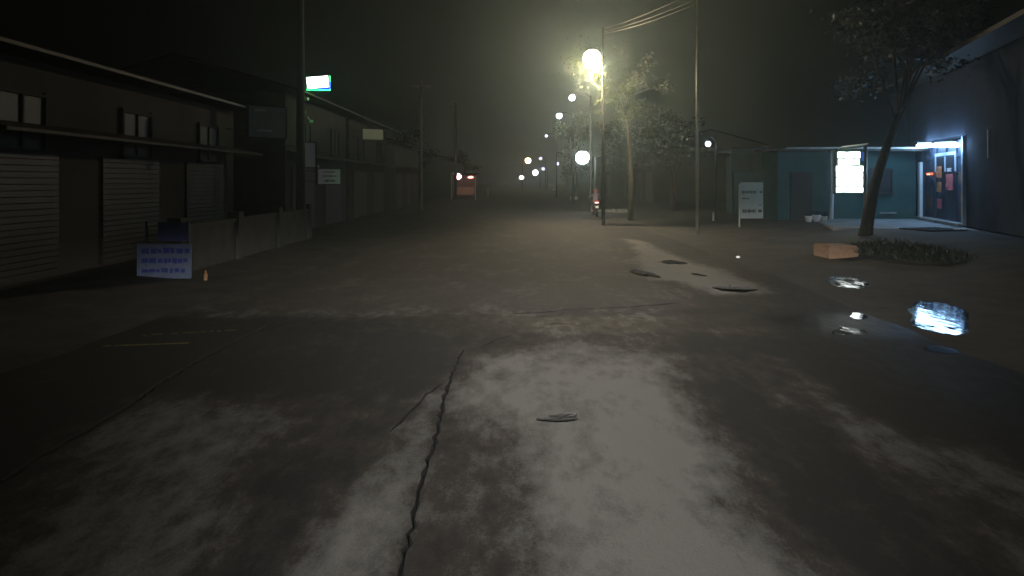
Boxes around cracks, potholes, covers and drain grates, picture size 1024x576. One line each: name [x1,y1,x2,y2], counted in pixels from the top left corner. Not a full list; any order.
pothole [536,412,579,423]
pothole [629,268,661,278]
crack [390,336,510,576]
pothole [712,285,758,293]
